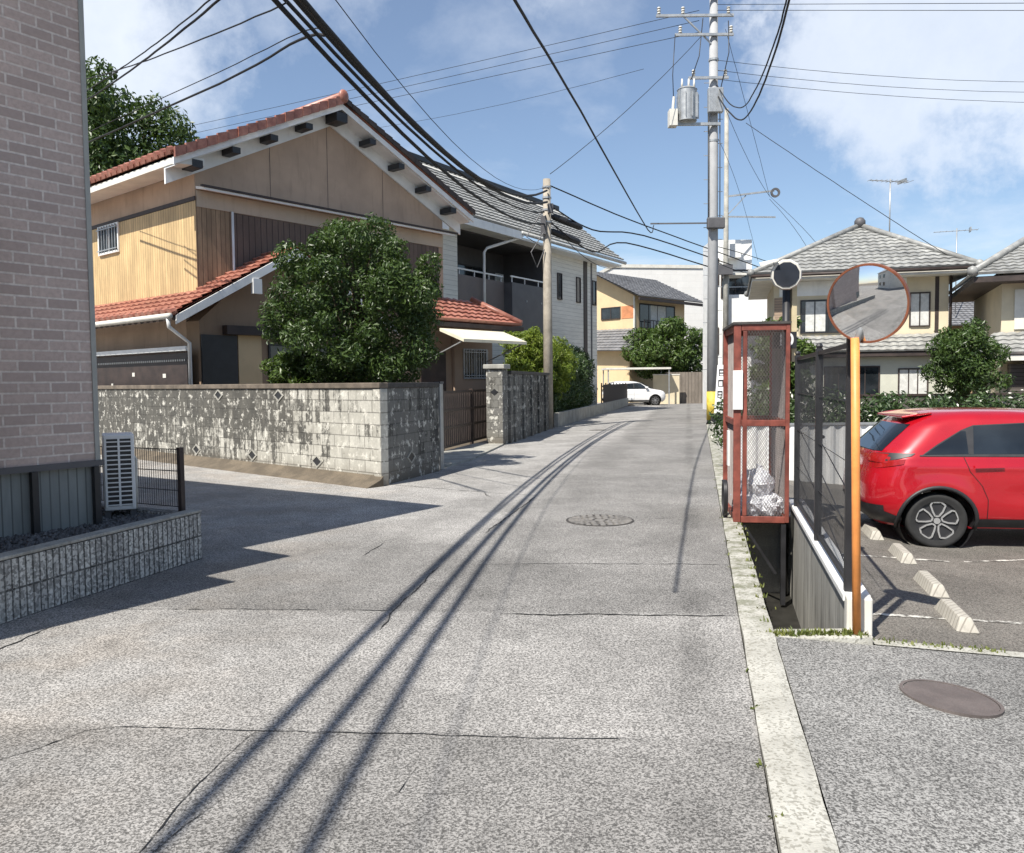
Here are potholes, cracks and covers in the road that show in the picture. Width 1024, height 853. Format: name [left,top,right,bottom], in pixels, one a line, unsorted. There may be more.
crack [2,726,626,853]
manhole cover [899,679,1005,719]
manhole cover [566,514,634,526]
crack [224,567,438,629]
